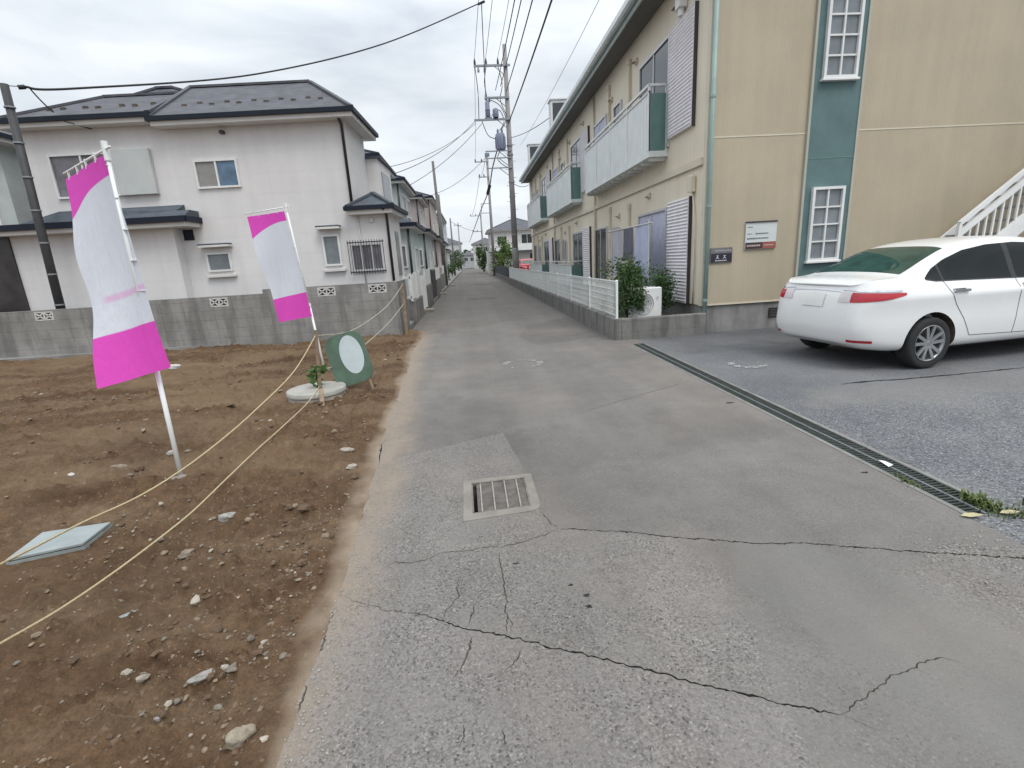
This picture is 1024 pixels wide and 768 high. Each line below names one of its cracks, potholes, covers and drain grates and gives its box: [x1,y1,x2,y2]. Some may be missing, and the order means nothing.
drain grate [463,473,540,543]
crack [351,514,1024,727]
